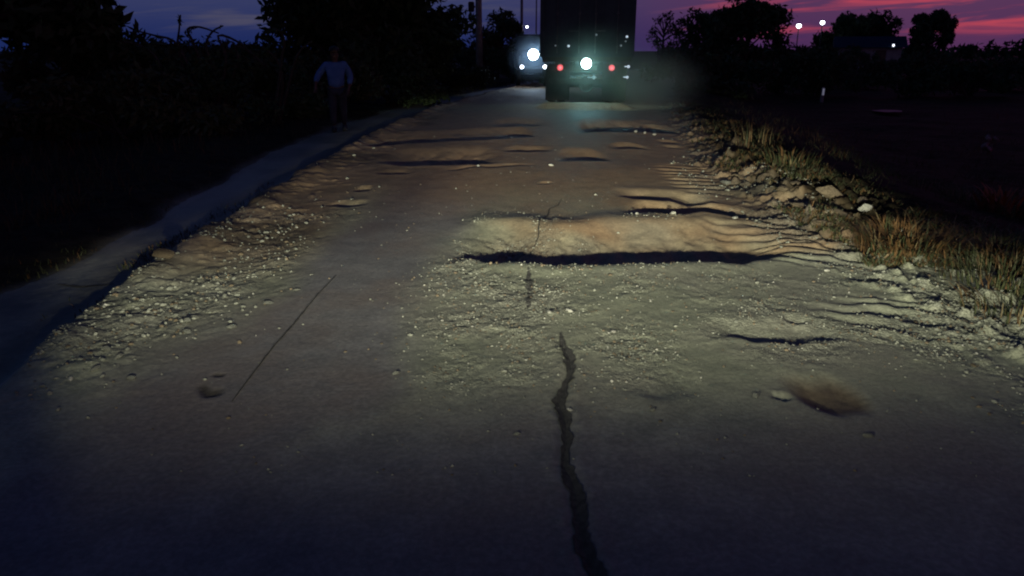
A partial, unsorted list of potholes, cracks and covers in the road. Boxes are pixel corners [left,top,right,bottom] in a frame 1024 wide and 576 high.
pothole [555,147,611,162]
pothole [699,314,863,346]
pothole [375,146,501,166]
pothole [443,217,800,266]
pothole [620,200,768,220]
crack [232,279,333,401]
crack [525,201,561,308]
pothole [612,188,722,207]
pothole [572,119,684,134]
pothole [193,379,231,398]
crack [551,332,608,576]
